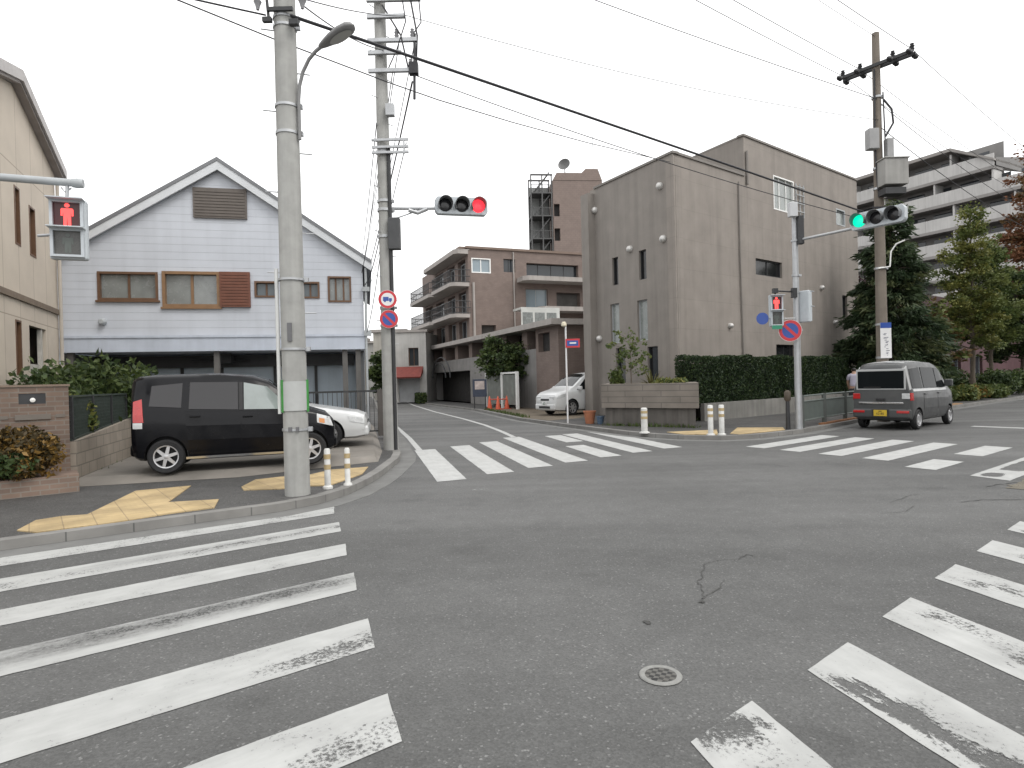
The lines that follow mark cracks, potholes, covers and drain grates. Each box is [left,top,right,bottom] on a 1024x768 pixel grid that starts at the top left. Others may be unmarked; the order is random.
crack [964,482,1018,502]
manhole cover [639,665,683,686]
crack [697,554,757,601]
